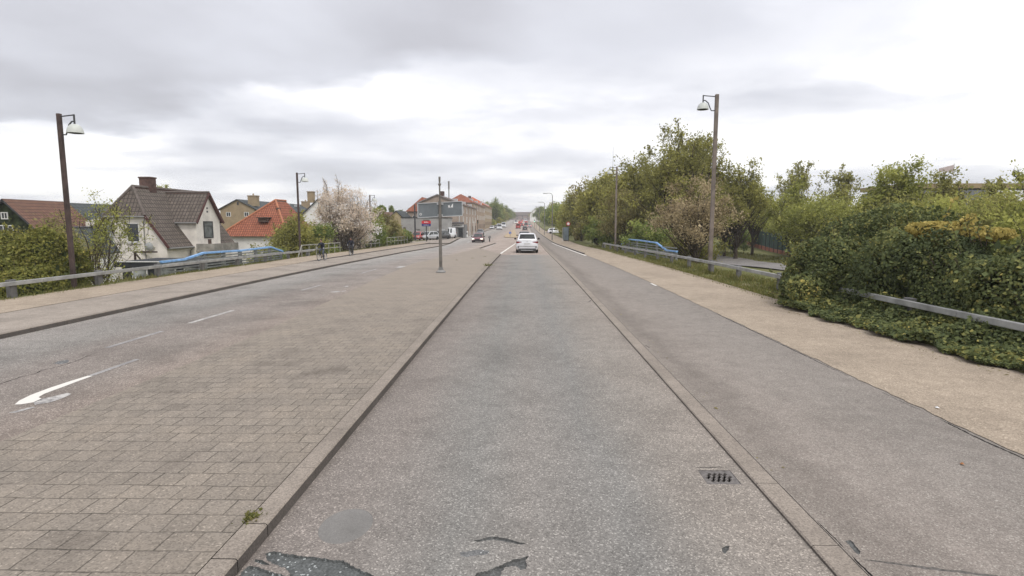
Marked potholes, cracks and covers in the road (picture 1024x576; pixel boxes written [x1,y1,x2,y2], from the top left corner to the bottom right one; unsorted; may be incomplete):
pothole [475,556,528,576]
drain grate [698,470,741,484]
pothole [240,566,285,576]
pothole [265,551,374,576]
